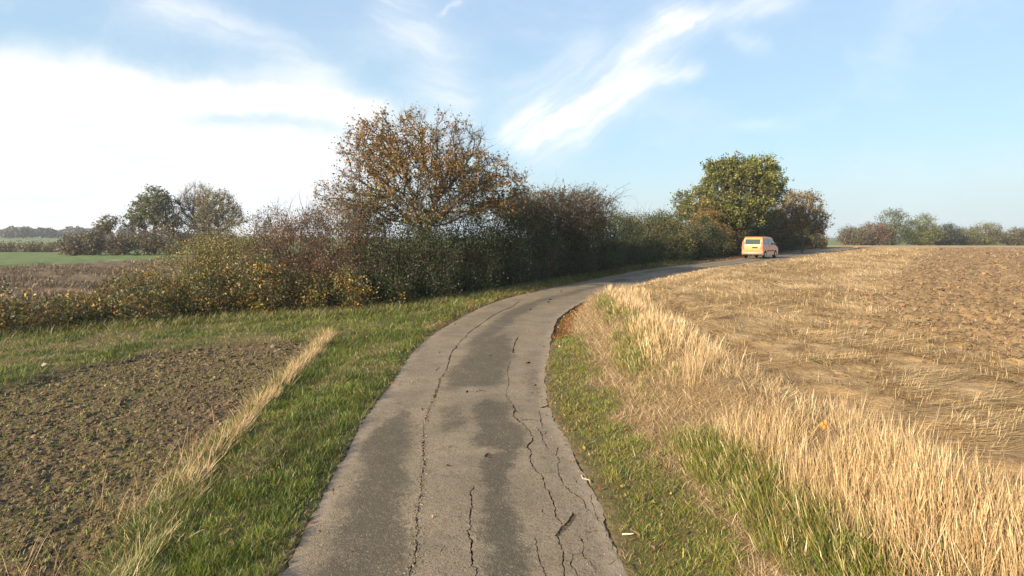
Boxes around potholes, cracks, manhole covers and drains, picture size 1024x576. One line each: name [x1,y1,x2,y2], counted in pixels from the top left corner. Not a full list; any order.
pothole [555,513,577,537]
crack [506,361,618,576]
crack [468,488,478,576]
